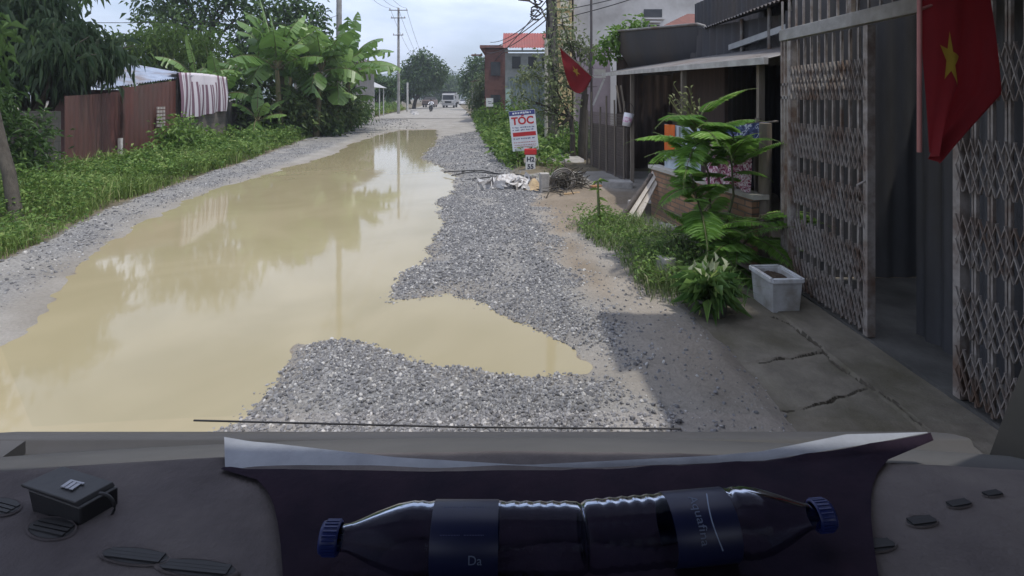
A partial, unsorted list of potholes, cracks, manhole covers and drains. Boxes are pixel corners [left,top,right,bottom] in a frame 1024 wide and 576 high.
pothole [0,129,624,433]
crack [759,316,922,426]
